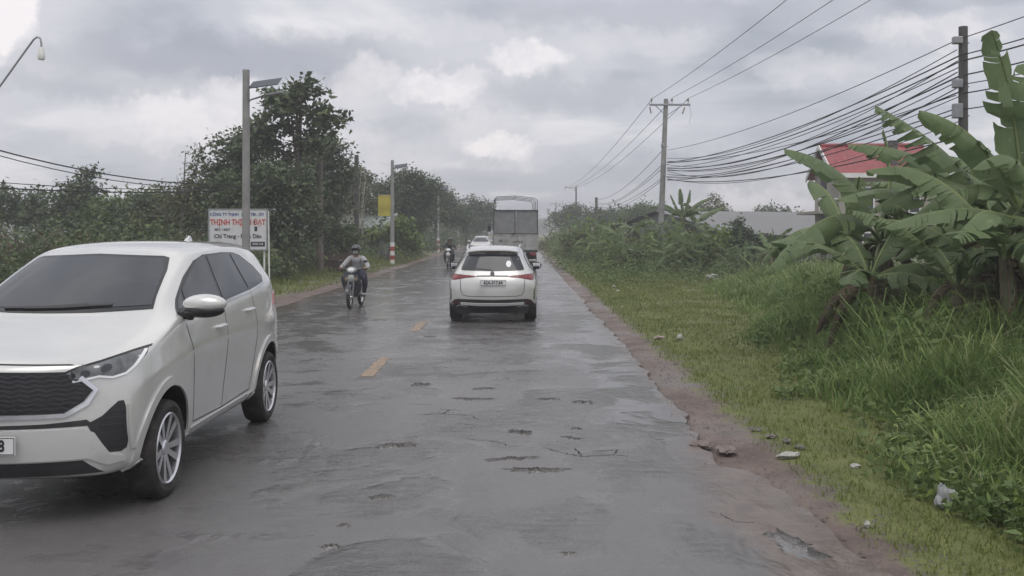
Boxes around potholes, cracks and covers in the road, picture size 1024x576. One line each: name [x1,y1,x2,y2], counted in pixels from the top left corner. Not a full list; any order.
pothole [762,528,833,559]
crack [547,448,624,457]
pothole [374,441,419,450]
crack [417,404,506,446]
